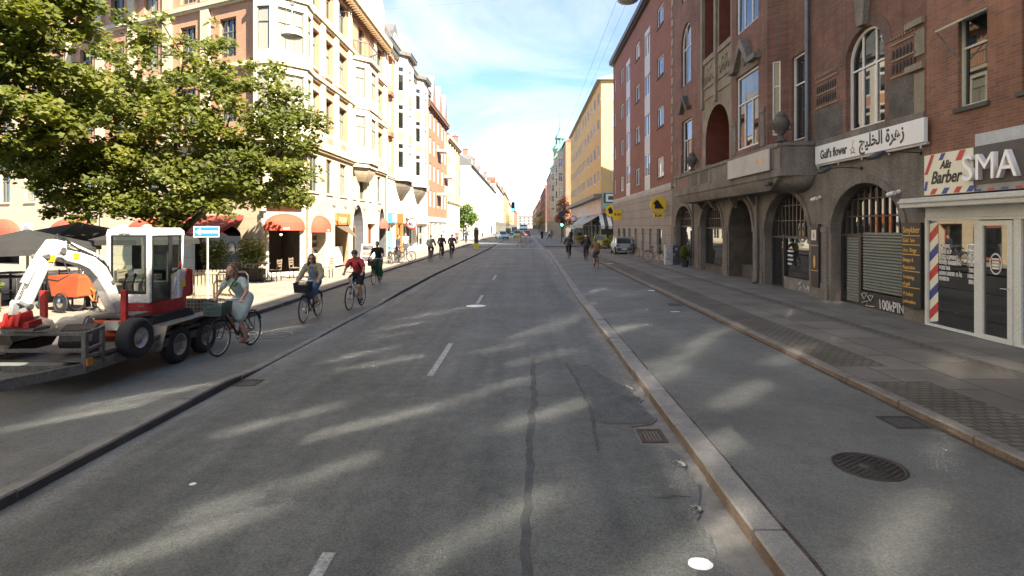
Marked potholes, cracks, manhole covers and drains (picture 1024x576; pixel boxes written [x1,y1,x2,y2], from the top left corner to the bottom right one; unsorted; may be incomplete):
drain grate [636,429,669,443]
drain grate [875,416,933,429]
manhole cover [830,452,910,482]
